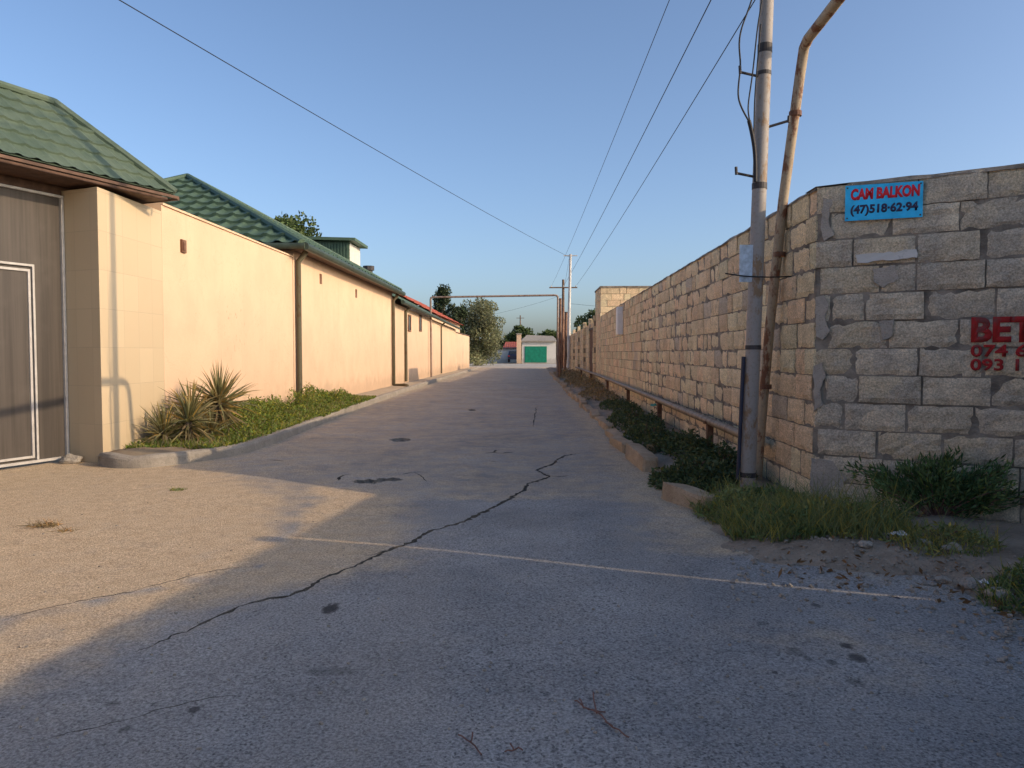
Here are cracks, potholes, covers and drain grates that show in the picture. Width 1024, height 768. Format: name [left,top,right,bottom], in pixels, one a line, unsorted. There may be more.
crack [140,452,591,650]
